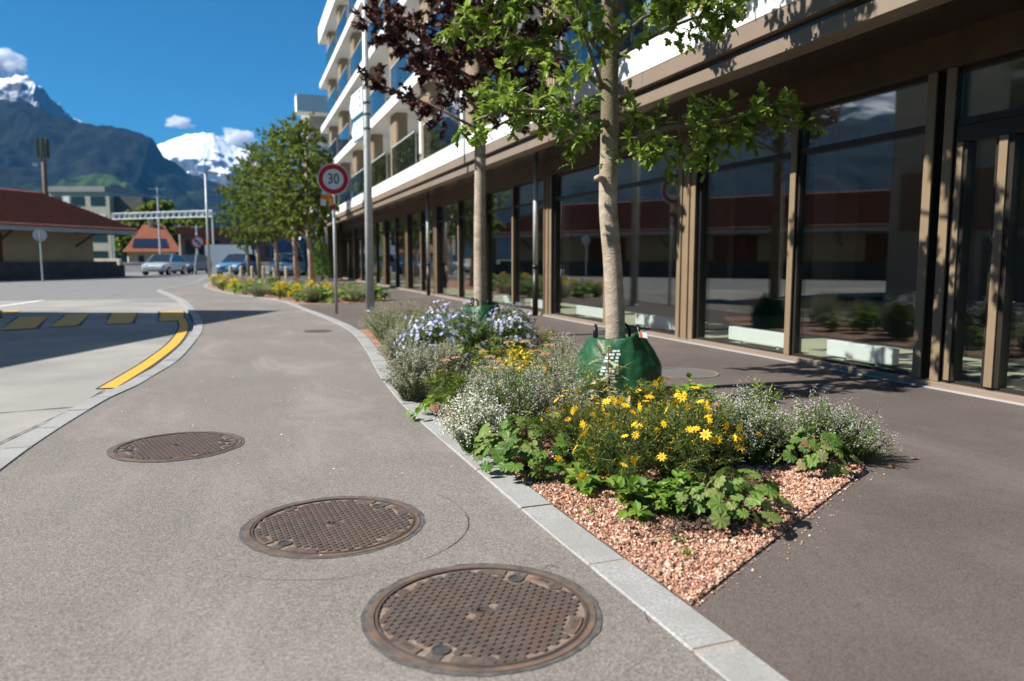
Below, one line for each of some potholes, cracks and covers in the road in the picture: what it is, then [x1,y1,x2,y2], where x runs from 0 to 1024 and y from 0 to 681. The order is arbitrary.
manhole cover [239,496,425,559]
manhole cover [360,563,602,677]
manhole cover [661,368,719,379]
manhole cover [107,431,244,462]
